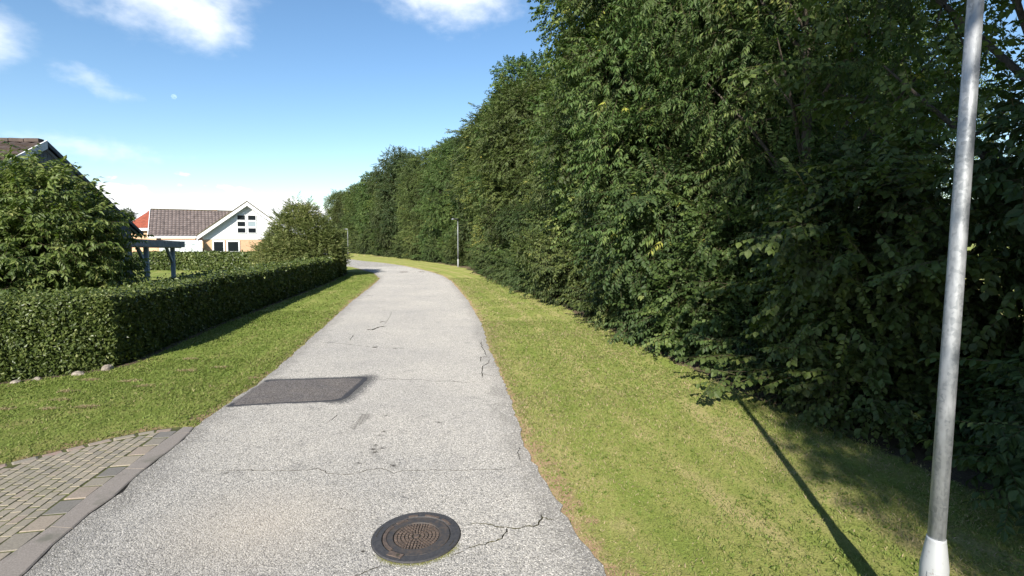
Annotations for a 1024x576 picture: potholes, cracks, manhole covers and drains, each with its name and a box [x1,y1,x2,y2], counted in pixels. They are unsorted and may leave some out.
manhole cover [371,512,461,564]
crack [452,514,554,555]
crack [195,465,519,475]
